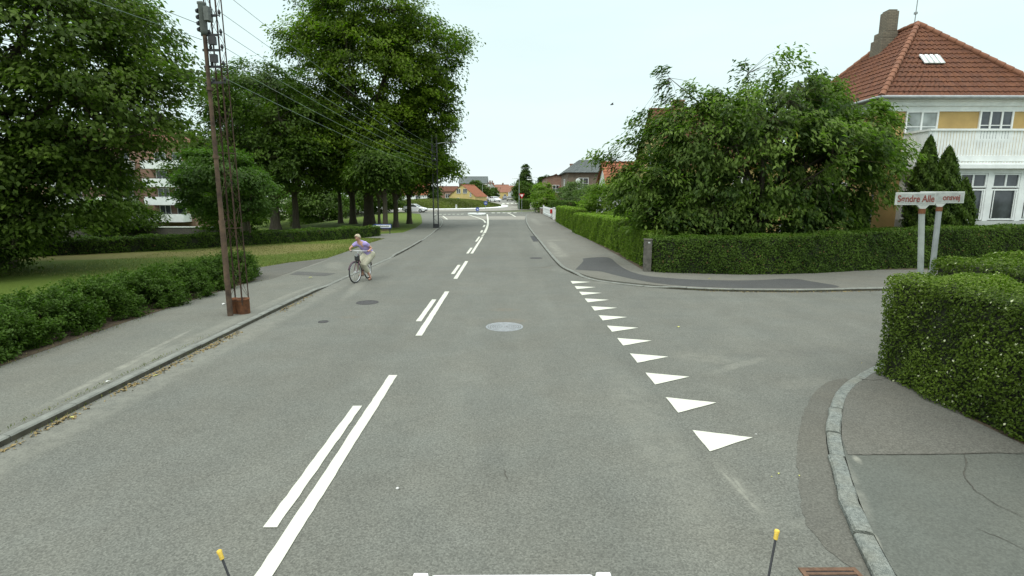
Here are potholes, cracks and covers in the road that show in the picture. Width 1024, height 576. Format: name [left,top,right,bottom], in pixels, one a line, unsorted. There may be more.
crack [850,452,1023,517]
drain grate [798,567,863,576]
manhole cover [486,322,523,331]
